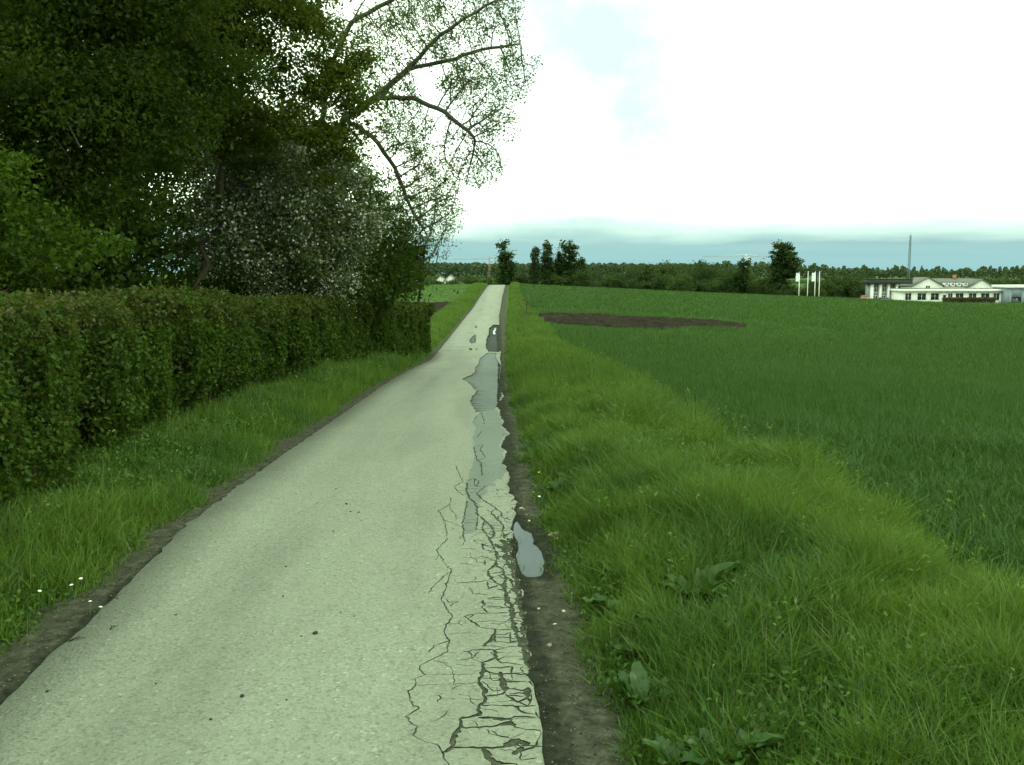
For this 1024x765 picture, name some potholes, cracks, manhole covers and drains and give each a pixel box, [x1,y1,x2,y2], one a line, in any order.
crack [405,445,542,765]
